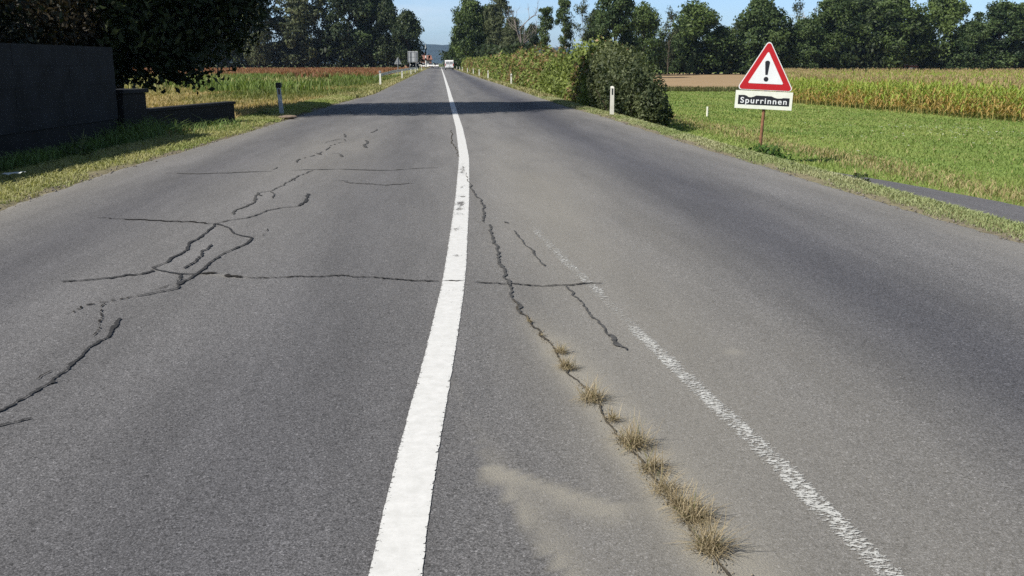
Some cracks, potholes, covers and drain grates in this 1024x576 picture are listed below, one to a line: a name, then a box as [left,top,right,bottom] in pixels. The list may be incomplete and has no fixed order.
crack [202,131,731,576]
